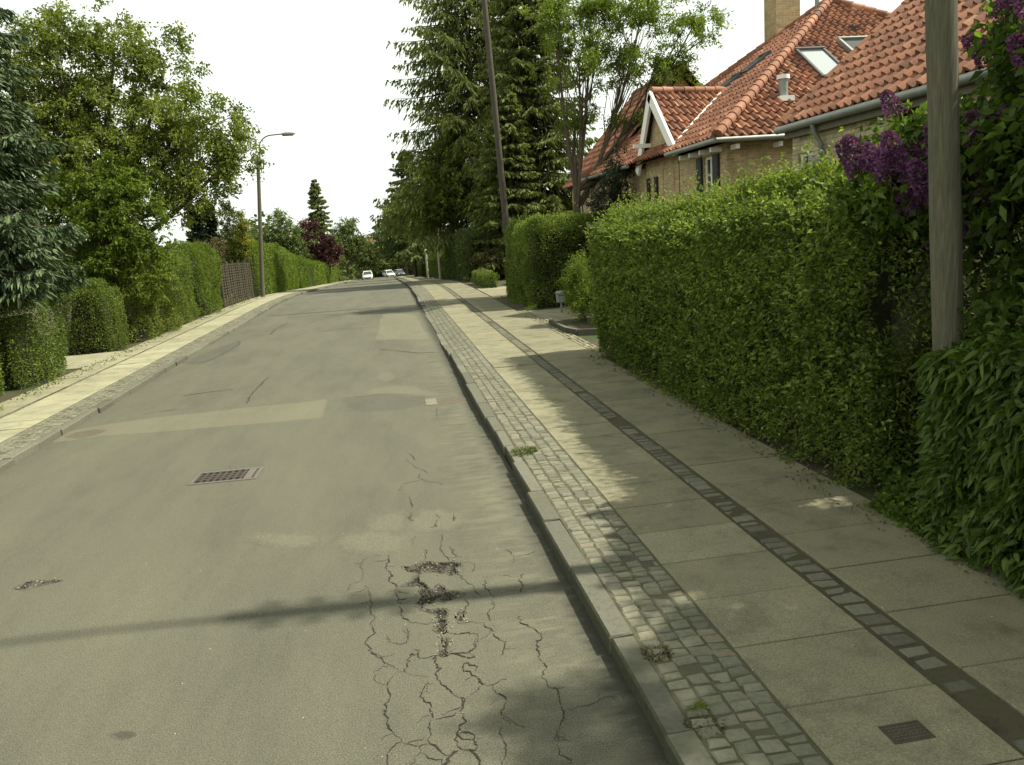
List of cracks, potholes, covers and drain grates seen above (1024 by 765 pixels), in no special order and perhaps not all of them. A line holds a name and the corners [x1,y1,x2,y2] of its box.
pothole [400,559,466,620]
pothole [9,577,61,592]
pothole [435,636,454,657]
pothole [432,617,452,637]
crack [346,453,609,765]
